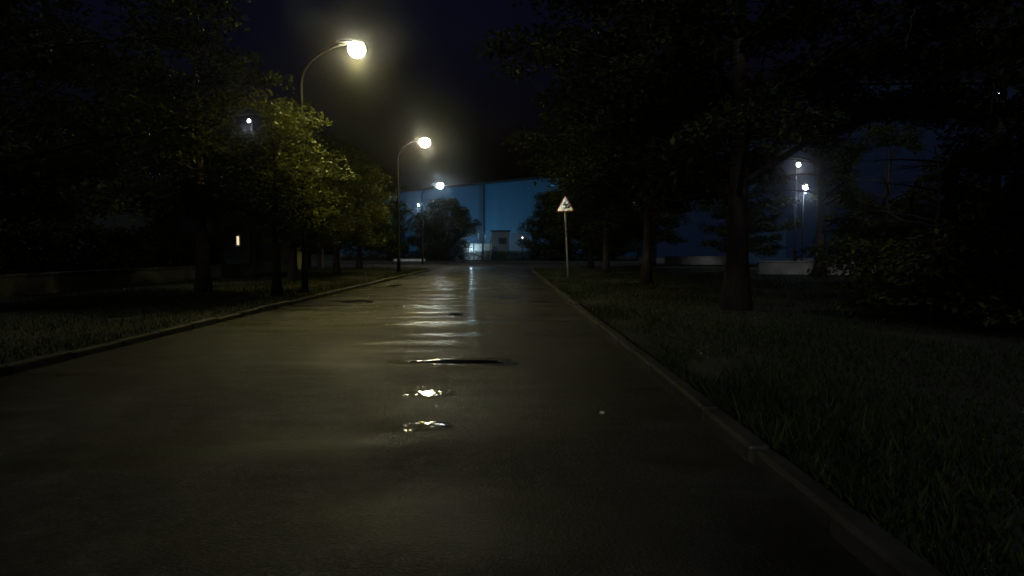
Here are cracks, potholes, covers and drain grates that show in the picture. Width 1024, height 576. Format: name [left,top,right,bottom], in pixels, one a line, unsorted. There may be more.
pothole [386,357,519,366]
